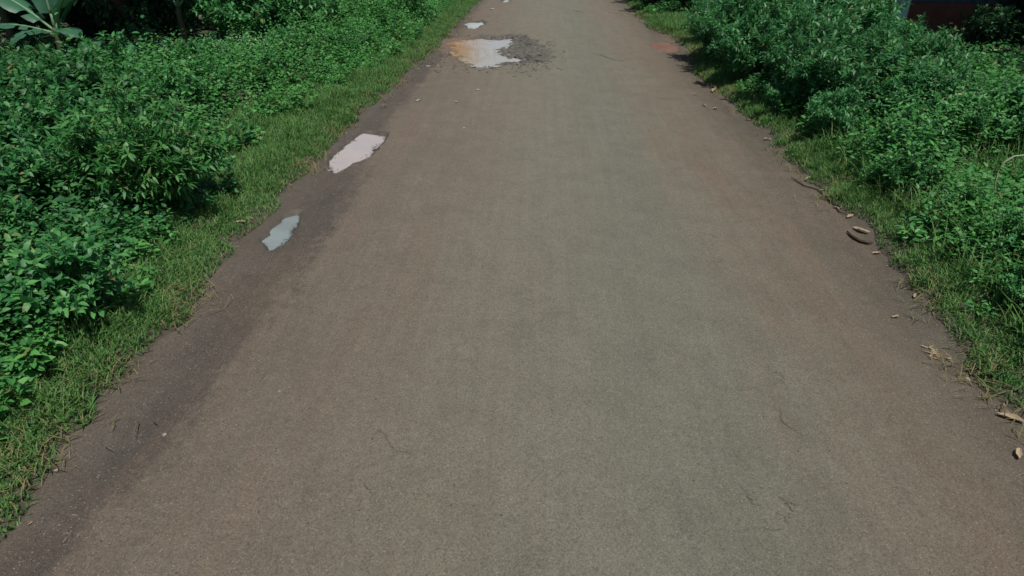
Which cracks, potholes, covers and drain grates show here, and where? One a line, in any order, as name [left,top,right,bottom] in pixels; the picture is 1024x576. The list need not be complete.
pothole [461,20,487,29]
pothole [441,34,559,69]
pothole [324,130,390,174]
crack [360,403,415,495]
crack [742,486,797,532]
pothole [256,209,305,253]
